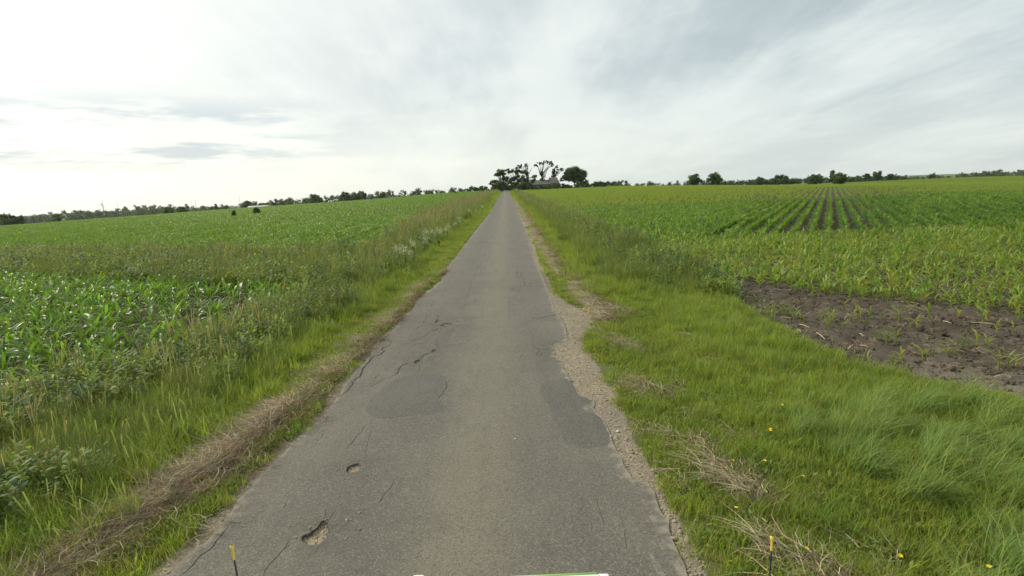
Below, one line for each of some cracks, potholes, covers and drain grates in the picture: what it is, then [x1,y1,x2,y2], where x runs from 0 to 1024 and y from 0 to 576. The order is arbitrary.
crack [337,301,454,397]
pothole [301,520,330,546]
crack [182,527,228,575]
crack [505,269,555,361]
